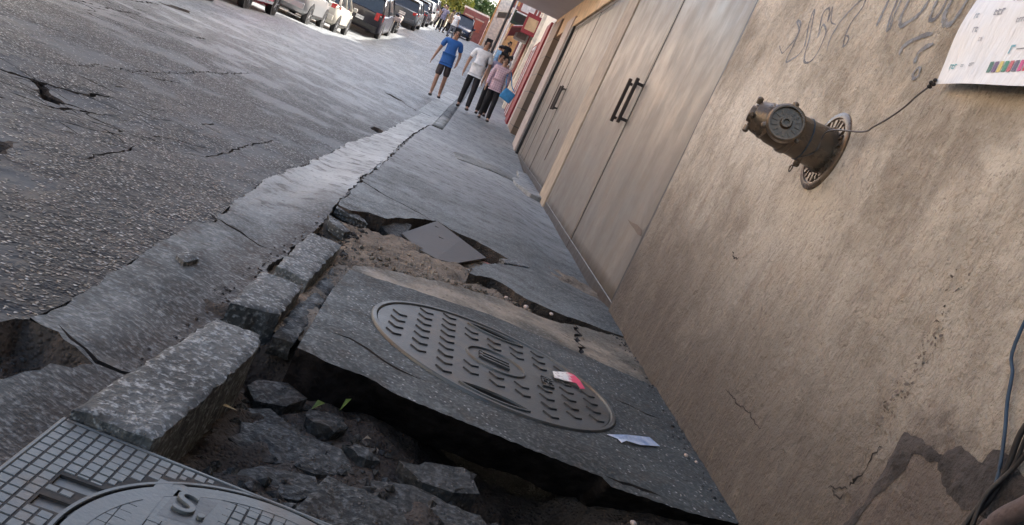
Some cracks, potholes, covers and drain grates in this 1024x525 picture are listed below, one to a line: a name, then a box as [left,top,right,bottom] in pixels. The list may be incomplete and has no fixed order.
crack [0,47,276,172]
crack [561,326,585,354]
manhole cover [371,300,616,433]
